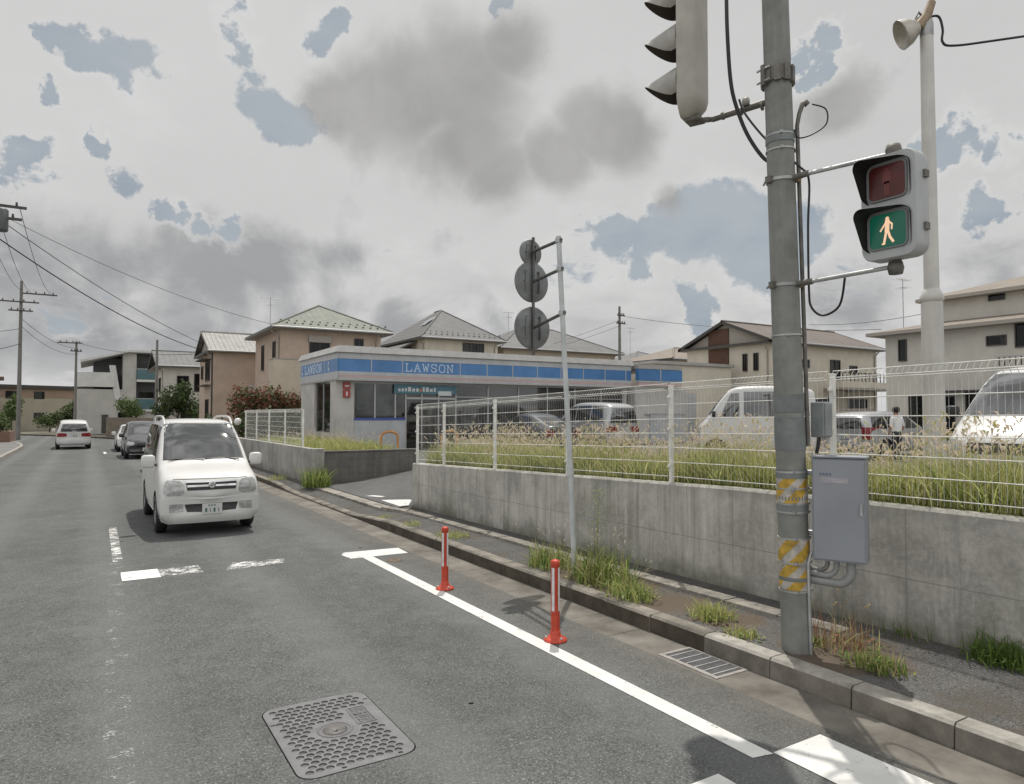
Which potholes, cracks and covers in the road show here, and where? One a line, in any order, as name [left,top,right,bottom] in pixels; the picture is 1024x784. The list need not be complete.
manhole cover [262,692,416,780]
drain grate [658,647,749,680]
